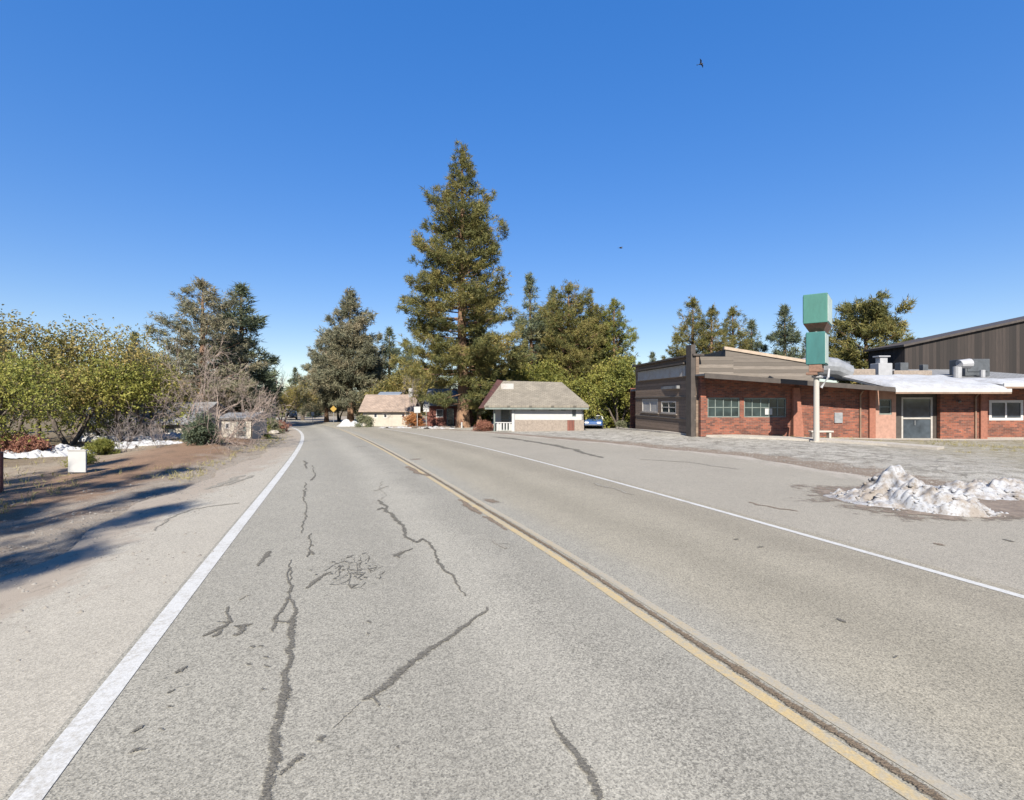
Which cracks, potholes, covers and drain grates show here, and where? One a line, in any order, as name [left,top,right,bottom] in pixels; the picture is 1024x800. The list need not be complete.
crack [550,716,604,800]
crack [202,461,489,800]
